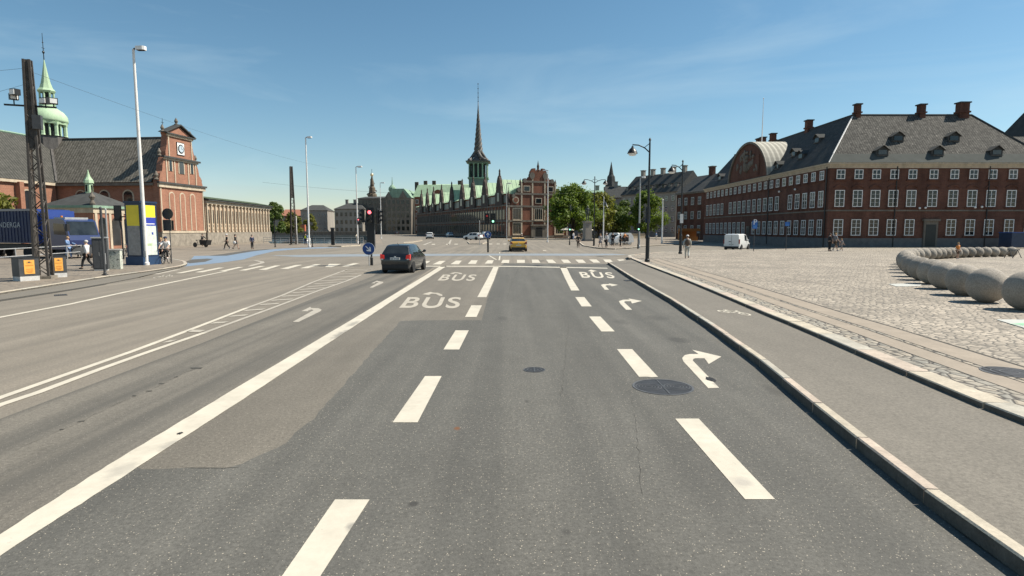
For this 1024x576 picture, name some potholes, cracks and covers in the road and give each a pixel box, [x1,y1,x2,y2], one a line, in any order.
manhole cover [979,366,1024,378]
manhole cover [632,379,694,395]
